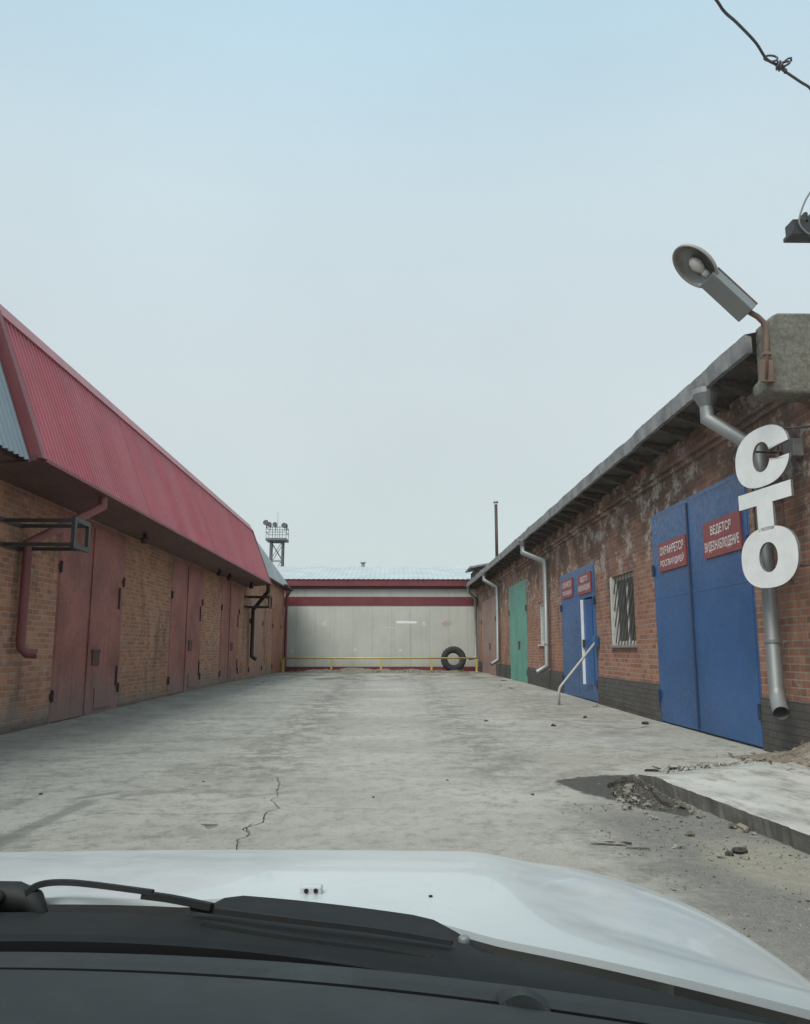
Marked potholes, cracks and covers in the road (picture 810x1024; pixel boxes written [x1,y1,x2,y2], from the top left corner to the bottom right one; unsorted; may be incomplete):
crack [85,778,441,850]
pothole [607,777,670,810]
